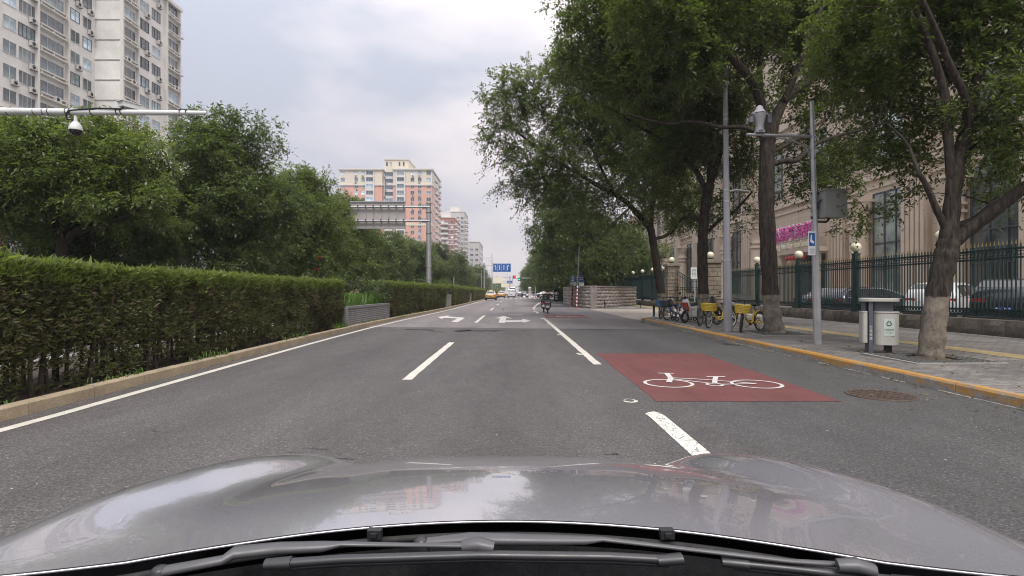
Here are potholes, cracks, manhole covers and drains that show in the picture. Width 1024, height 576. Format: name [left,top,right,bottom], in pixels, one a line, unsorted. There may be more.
manhole cover [844,389,919,402]
